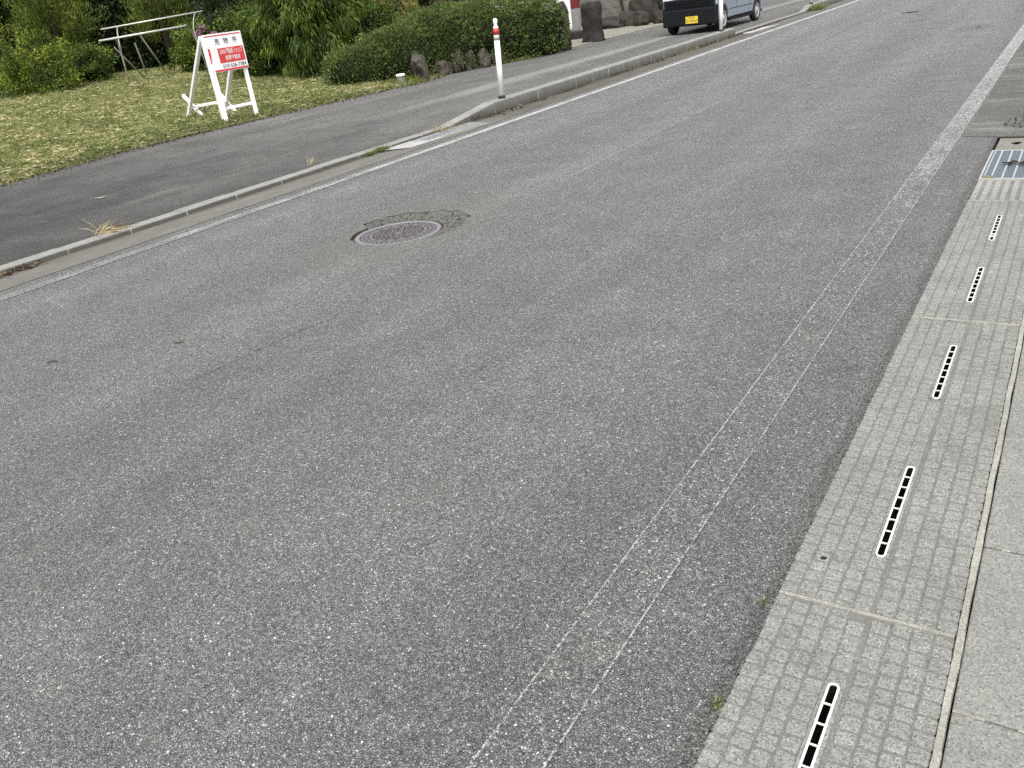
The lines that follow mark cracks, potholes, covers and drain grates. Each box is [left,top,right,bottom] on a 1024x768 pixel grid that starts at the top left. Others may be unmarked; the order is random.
drain grate [978,149,1024,181]
manhole cover [355,221,442,245]
